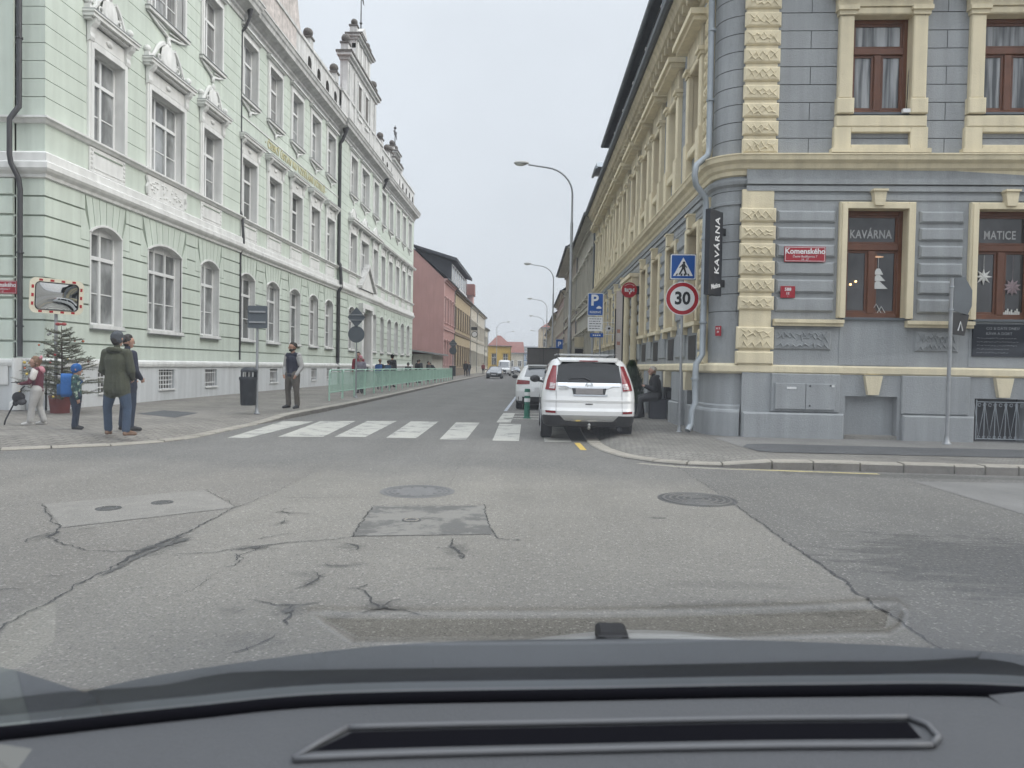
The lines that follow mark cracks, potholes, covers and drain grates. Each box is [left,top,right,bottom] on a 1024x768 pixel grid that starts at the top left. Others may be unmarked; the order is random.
manhole cover [657,492,738,507]
manhole cover [380,485,455,498]
crack [356,584,423,615]
crack [181,495,397,614]
crack [429,538,465,570]
crack [25,489,232,552]
